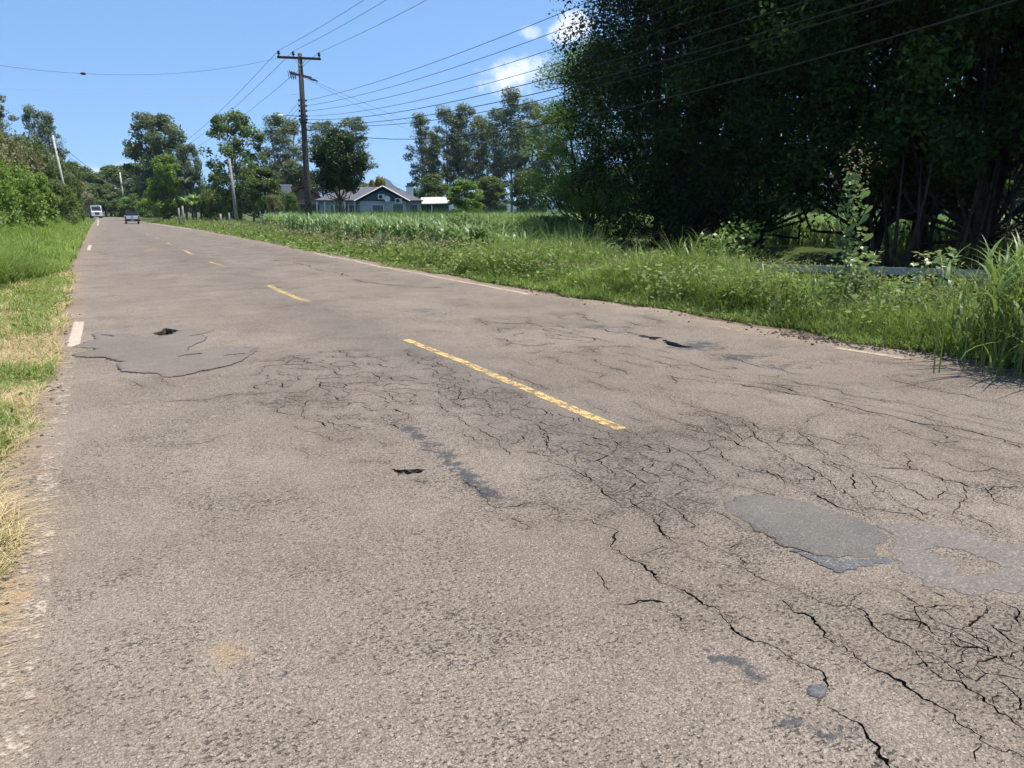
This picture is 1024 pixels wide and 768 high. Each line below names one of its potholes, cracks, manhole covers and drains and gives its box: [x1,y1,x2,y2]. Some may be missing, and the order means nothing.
crack [479,313,1023,451]
crack [253,350,426,482]
crack [407,351,1024,768]
pothole [154,328,178,336]
